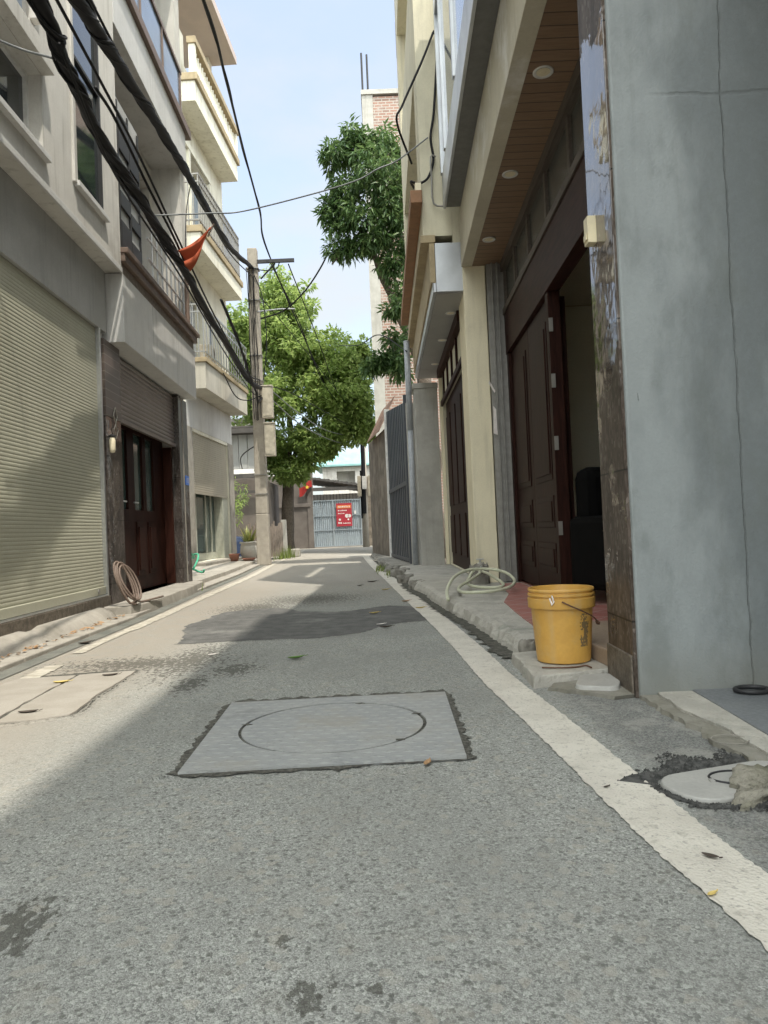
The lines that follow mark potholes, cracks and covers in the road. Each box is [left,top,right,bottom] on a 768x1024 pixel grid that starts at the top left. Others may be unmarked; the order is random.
manhole cover [166,689,477,777]
